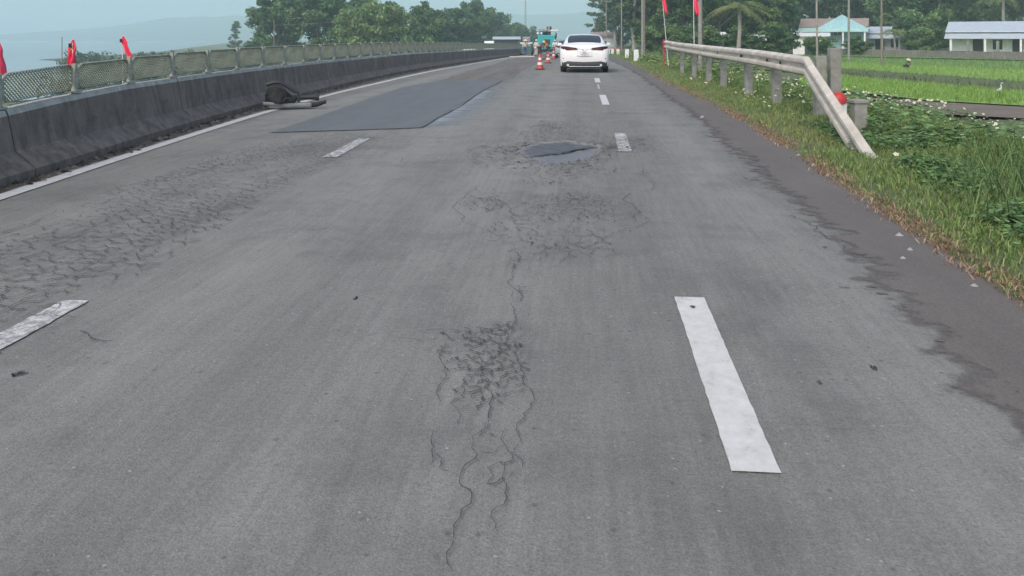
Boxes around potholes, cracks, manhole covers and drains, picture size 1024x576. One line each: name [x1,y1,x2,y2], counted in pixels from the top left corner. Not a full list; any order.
crack [0,132,394,353]
pothole [515,140,603,164]
crack [409,251,535,566]
crack [452,120,663,261]
crack [791,215,865,256]
